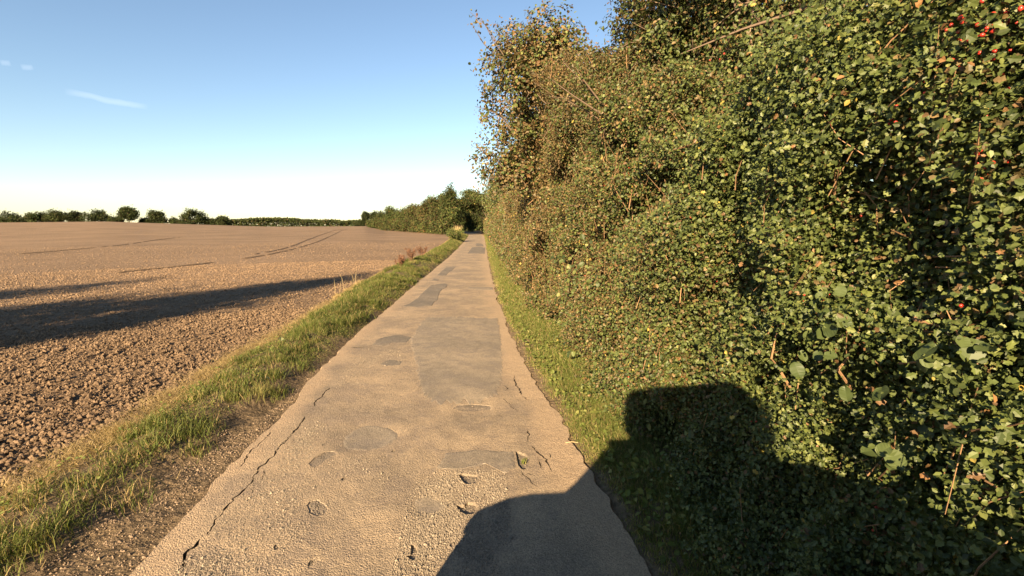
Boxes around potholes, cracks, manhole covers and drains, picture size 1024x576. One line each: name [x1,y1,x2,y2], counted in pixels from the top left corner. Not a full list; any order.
crack [181,388,330,573]
crack [521,429,552,486]
pothole [307,500,328,516]
pothole [459,473,478,484]
pothole [457,502,478,515]
